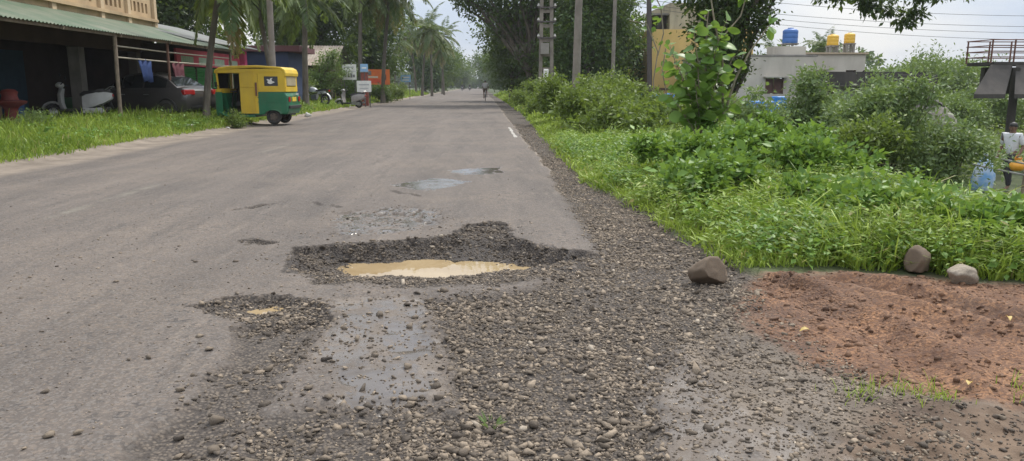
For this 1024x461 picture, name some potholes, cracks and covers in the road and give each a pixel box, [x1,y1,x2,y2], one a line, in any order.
pothole [182,292,340,336]
pothole [278,220,609,289]
